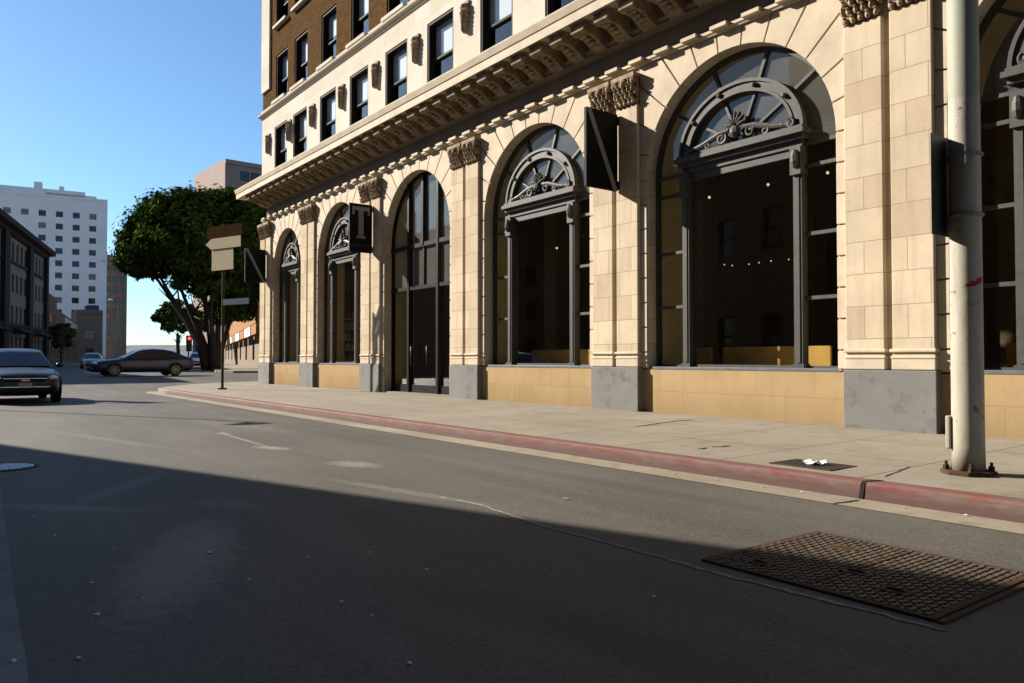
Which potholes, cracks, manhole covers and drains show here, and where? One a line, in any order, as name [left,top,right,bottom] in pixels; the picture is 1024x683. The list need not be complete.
drain grate [701,531,1024,624]
utility cover [769,459,857,471]
manhole cover [0,463,40,472]
